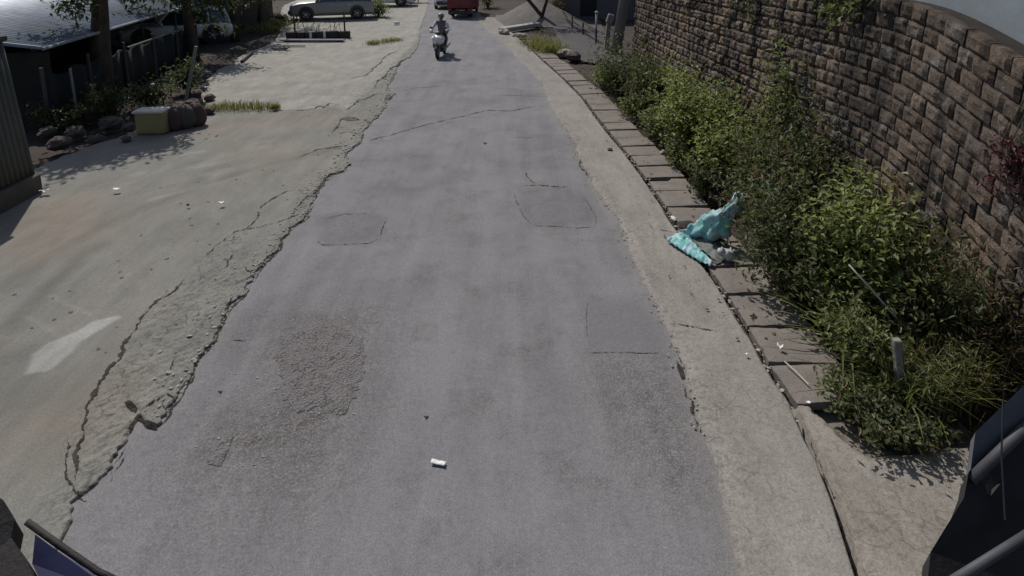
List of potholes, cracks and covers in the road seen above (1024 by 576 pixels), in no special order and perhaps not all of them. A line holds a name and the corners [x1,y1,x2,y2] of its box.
crack [206,172,342,353]
crack [64,279,189,495]
crack [276,51,529,156]
